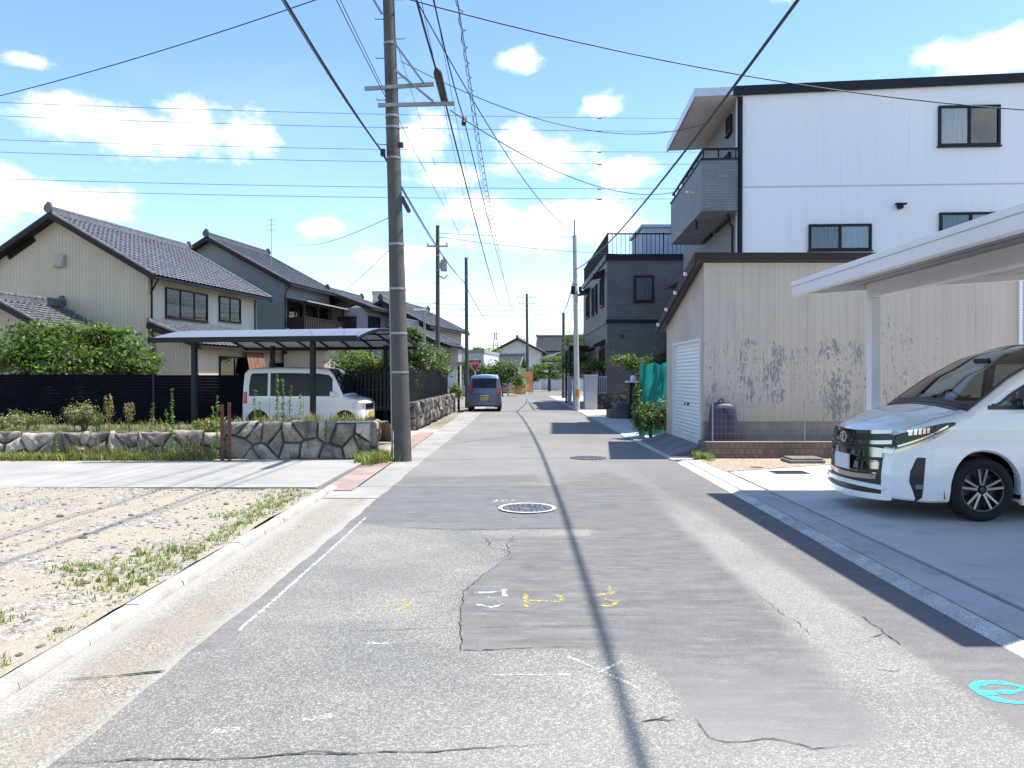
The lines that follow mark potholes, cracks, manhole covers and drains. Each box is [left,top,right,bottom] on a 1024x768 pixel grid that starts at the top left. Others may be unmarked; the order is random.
crack [364,527,578,650]
manhole cover [498,503,556,514]
crack [73,743,545,762]
